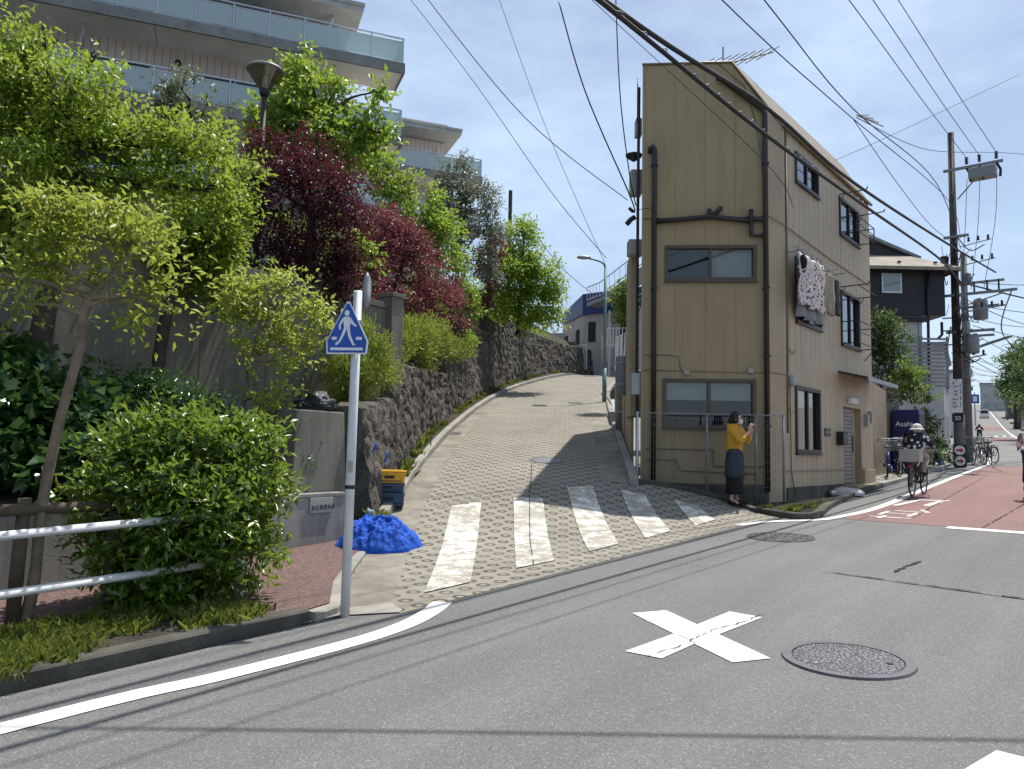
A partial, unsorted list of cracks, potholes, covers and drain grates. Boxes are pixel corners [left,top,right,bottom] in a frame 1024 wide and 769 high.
manhole cover [781,640,918,681]
manhole cover [746,532,816,542]
